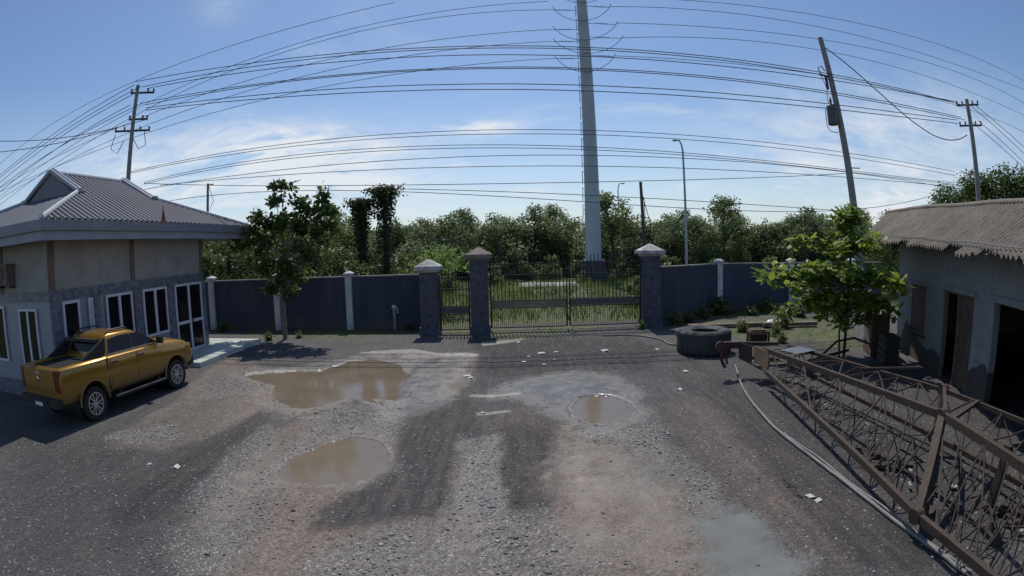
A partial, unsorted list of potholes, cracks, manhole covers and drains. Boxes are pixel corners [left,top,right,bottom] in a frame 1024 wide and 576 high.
pothole [268,434,396,487]
pothole [236,357,419,411]
pothole [567,394,638,425]
